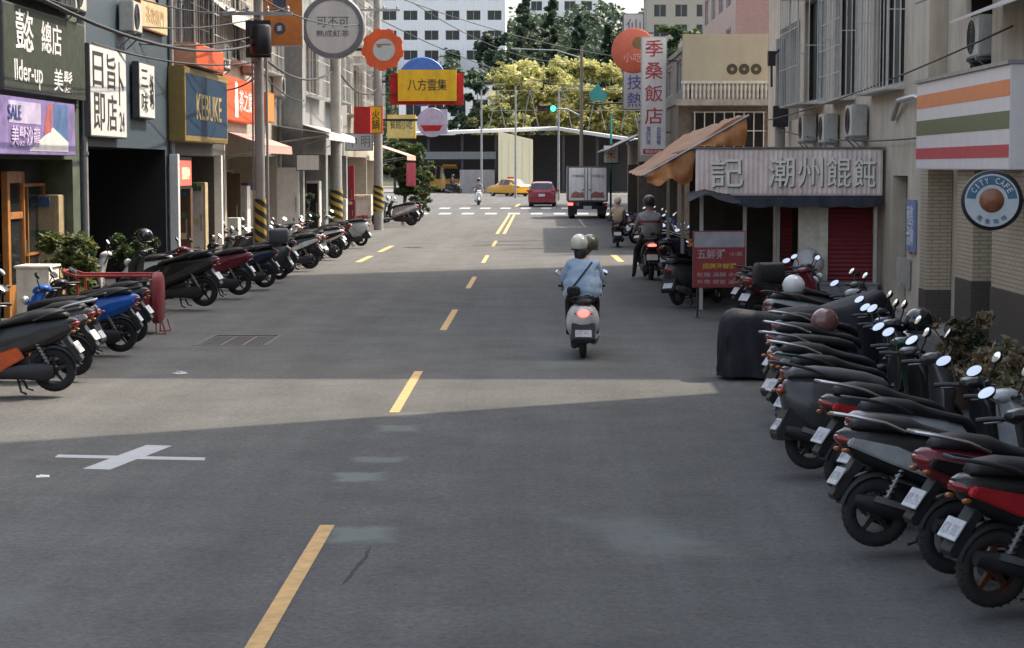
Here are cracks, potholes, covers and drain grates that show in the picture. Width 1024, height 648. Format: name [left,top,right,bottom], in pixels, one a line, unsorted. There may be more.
crack [342,545,371,585]
